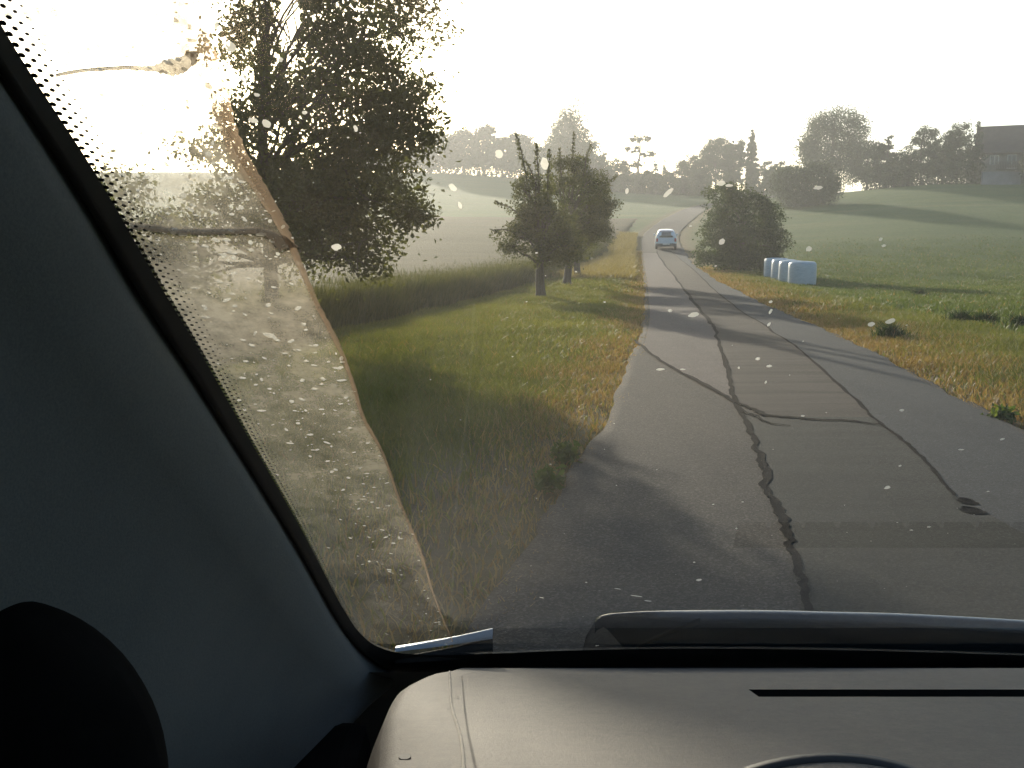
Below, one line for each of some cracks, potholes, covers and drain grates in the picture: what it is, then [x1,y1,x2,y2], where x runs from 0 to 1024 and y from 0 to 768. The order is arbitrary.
crack [656,250,956,611]
pothole [960,506,988,514]
